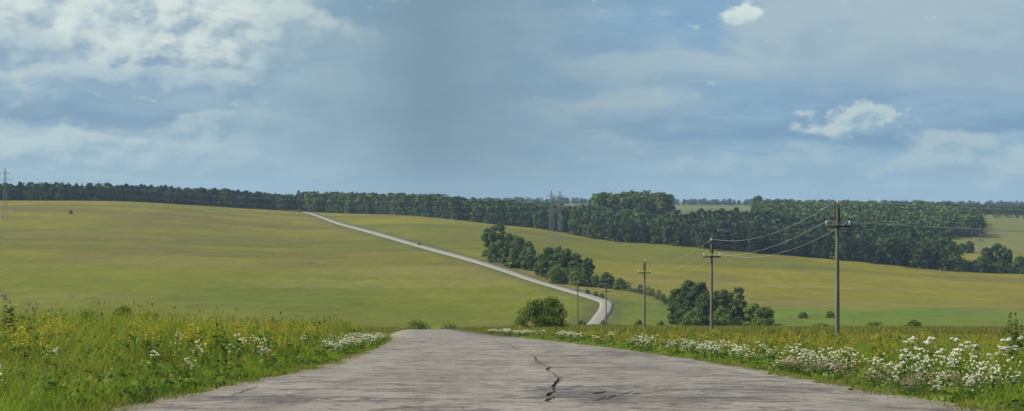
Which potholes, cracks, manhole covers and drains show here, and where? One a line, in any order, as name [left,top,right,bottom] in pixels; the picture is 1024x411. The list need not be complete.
crack [393,341,651,403]
